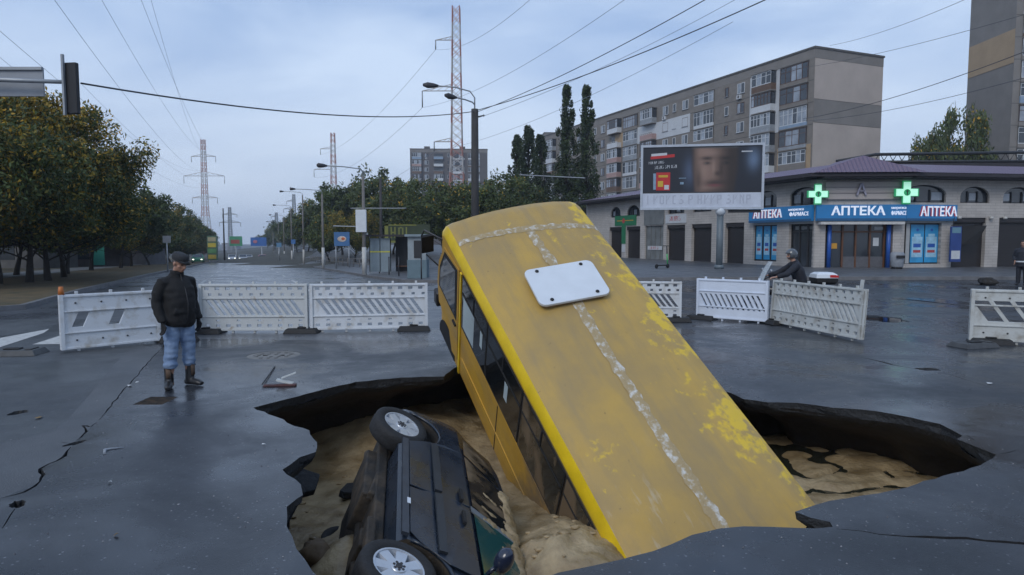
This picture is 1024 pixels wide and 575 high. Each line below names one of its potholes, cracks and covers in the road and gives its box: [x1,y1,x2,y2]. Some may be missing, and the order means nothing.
manhole cover [246,351,301,360]
crack [843,529,1024,545]
crack [2,423,96,528]
